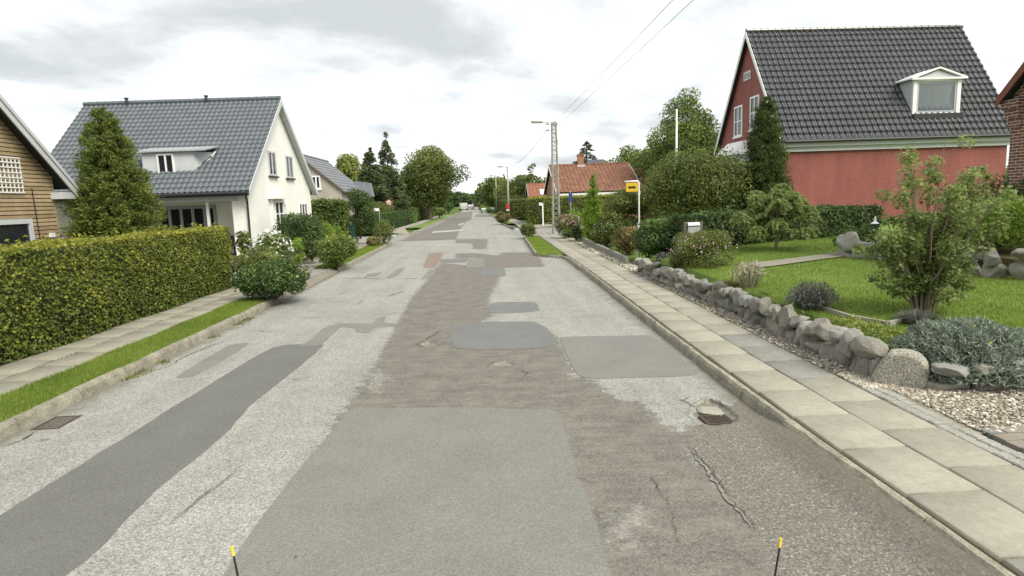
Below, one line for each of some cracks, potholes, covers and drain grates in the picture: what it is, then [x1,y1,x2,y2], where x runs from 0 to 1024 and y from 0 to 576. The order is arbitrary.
pothole [486,360,520,368]
crack [170,462,246,523]
crack [650,446,755,544]
